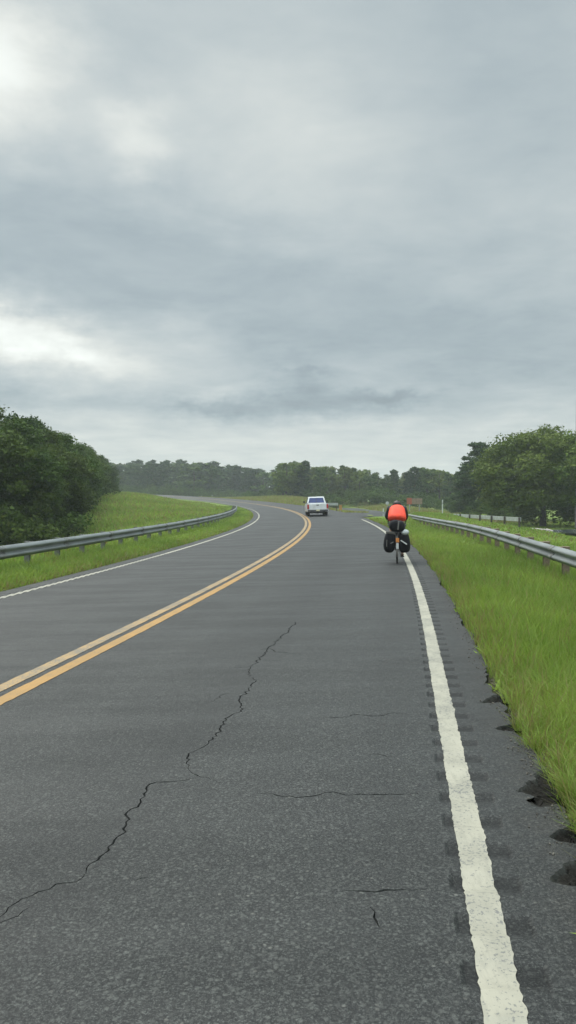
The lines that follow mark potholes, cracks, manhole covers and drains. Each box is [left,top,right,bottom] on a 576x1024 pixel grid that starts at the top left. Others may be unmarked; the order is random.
crack [0,622,296,923]
pothole [549,860,576,886]
pothole [549,823,576,844]
pothole [516,768,566,808]
pothole [480,694,508,706]
crack [346,889,422,927]
